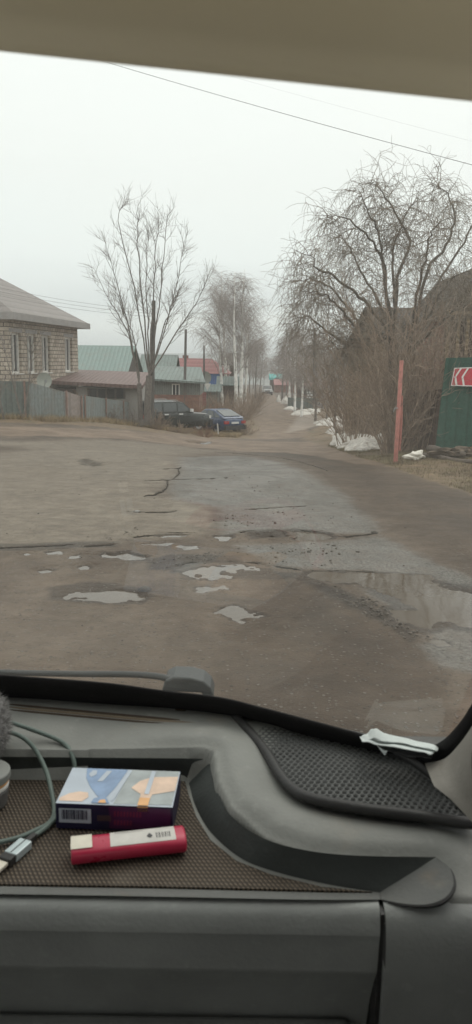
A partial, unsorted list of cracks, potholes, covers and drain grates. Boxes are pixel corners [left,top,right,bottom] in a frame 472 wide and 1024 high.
pothole [166,543,207,552]
pothole [181,583,240,596]
pothole [72,562,97,571]
pothole [289,567,472,636]
pothole [28,566,63,575]
pothole [271,527,346,542]
pothole [161,562,284,584]
pothole [39,582,164,610]
pothole [80,549,159,563]
pothole [198,600,284,627]
pothole [205,533,241,543]
